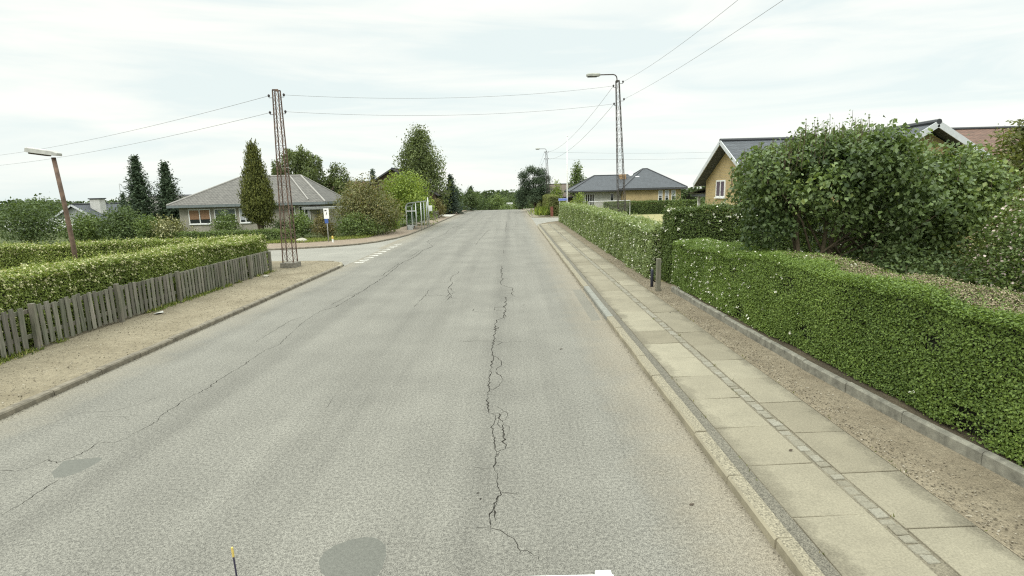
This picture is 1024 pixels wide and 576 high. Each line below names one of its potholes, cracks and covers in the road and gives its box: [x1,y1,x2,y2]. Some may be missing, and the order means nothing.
crack [476,268,539,559]
